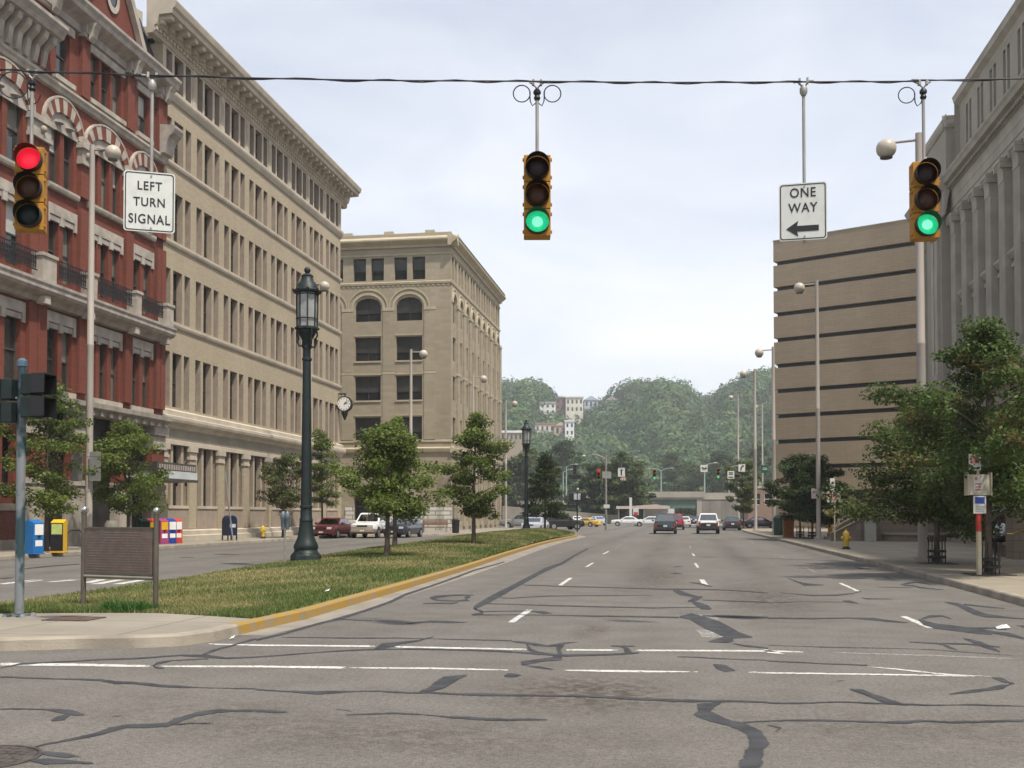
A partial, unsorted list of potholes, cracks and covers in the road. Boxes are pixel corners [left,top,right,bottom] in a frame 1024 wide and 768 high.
manhole cover [0,745,43,768]
